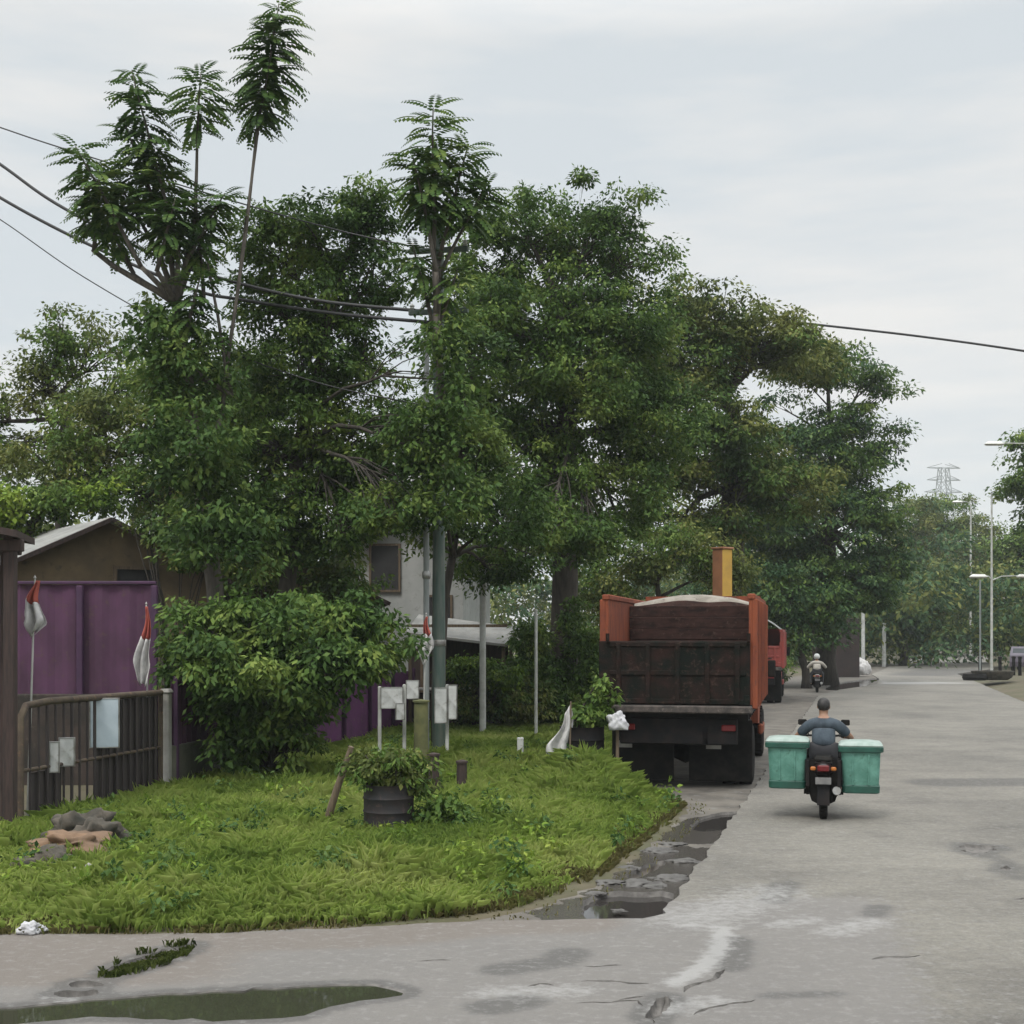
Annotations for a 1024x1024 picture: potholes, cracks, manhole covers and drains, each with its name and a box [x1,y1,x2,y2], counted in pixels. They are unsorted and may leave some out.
pothole [960,844,998,855]
pothole [0,984,406,1009]
pothole [581,891,674,916]
crack [683,970,754,1015]
crack [581,964,647,1006]
pothole [626,861,665,878]
